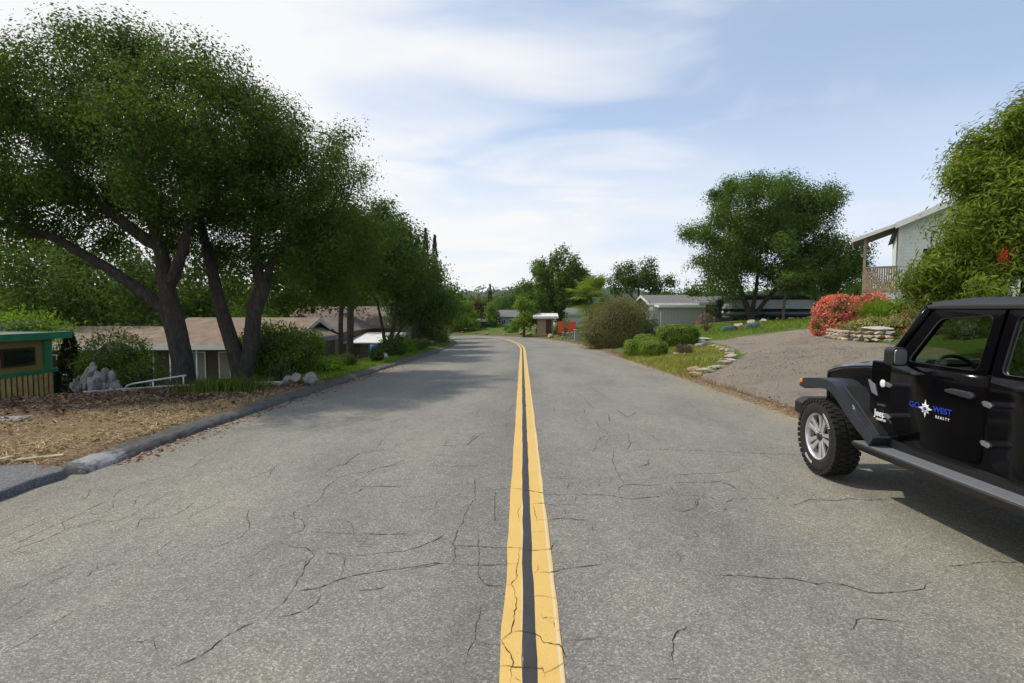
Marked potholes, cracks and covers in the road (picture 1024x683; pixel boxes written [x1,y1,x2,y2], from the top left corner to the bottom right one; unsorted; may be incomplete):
crack [561,386,884,560]
crack [266,443,659,682]
crack [728,562,930,593]
crack [162,622,255,673]
crack [2,476,218,619]
